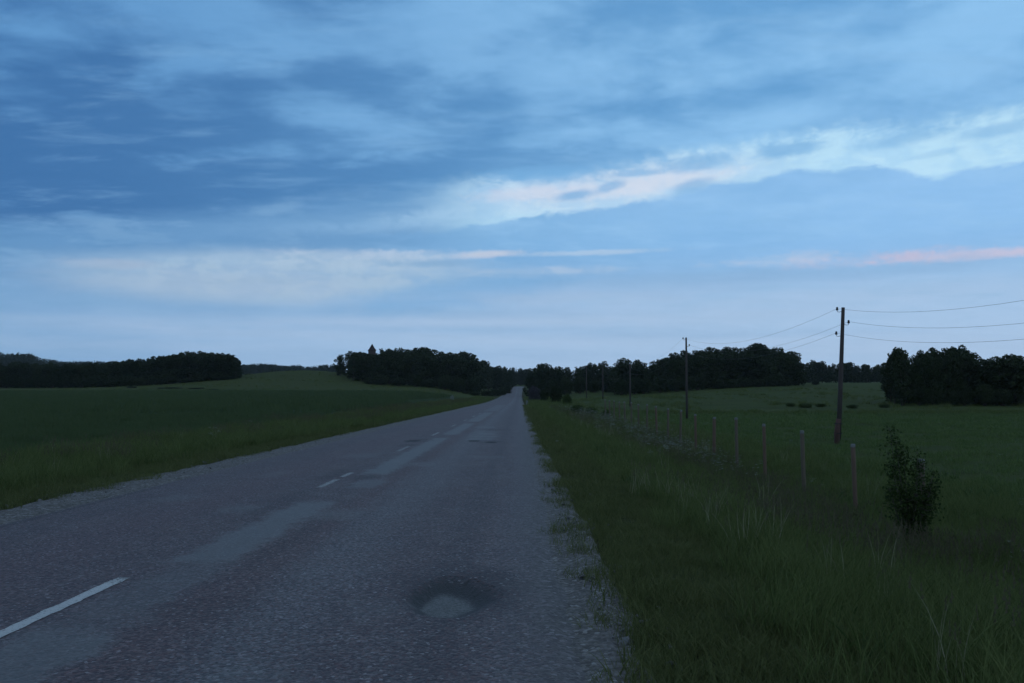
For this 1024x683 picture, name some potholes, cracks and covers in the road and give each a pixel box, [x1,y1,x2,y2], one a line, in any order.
pothole [404,576,504,619]
